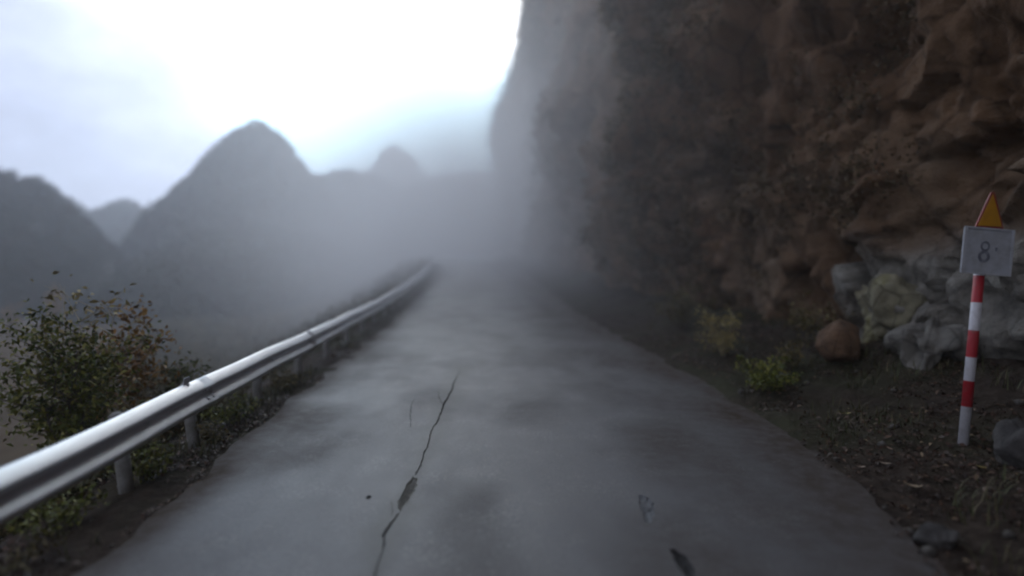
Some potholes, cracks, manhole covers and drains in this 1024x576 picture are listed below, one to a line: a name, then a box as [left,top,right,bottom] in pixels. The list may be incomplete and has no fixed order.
pothole [669,549,696,576]
crack [374,370,460,576]
pothole [638,494,655,523]
